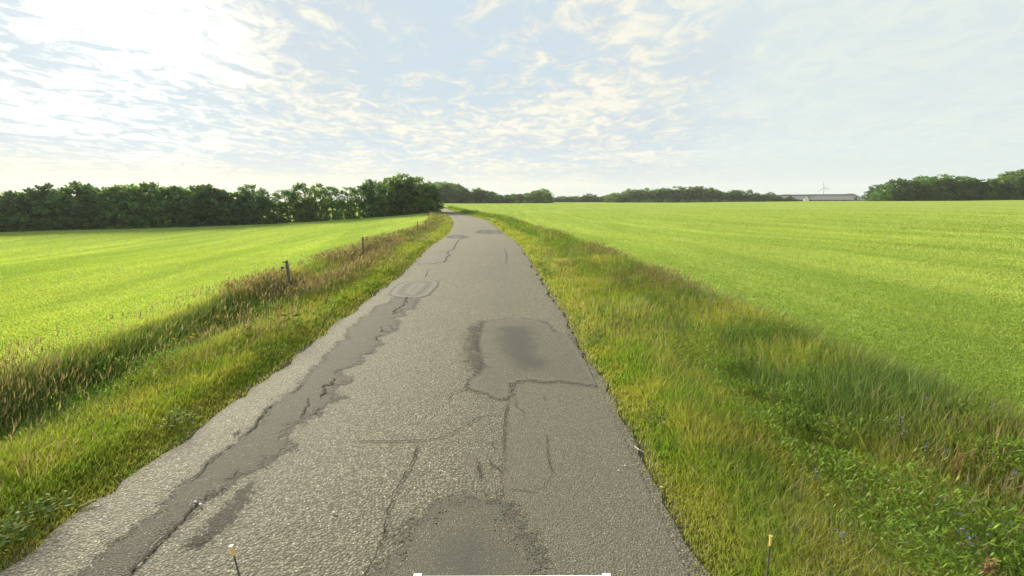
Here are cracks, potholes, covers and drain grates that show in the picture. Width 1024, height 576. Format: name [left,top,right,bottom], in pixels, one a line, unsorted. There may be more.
crack [355,414,493,576]
crack [477,436,554,506]
